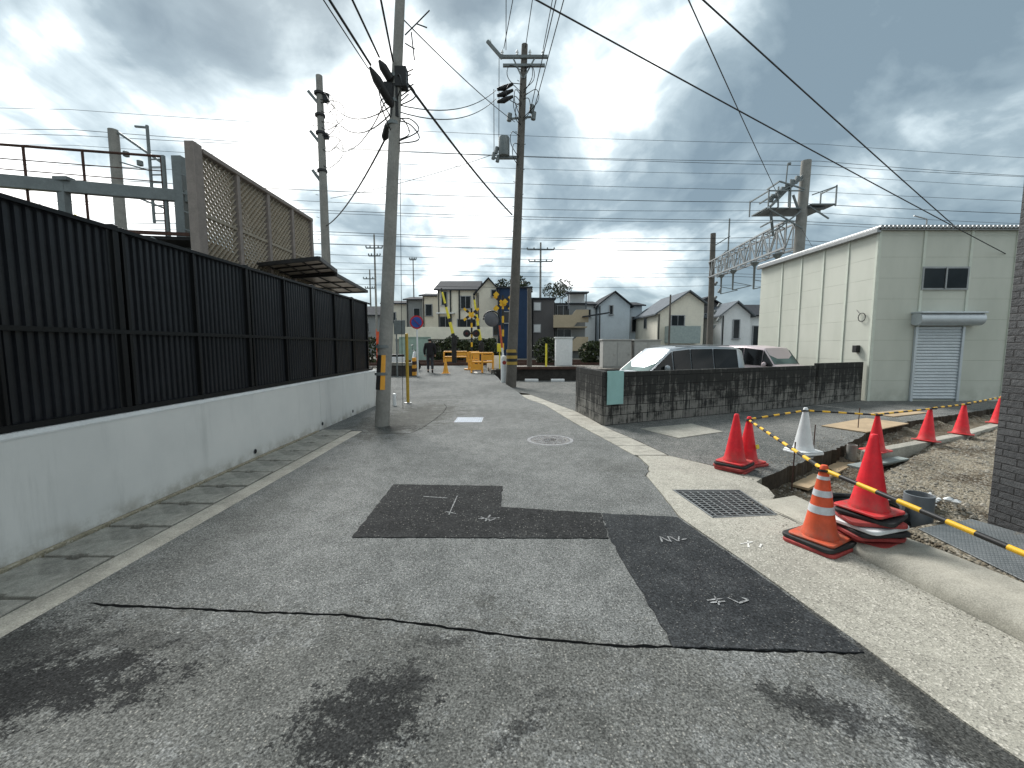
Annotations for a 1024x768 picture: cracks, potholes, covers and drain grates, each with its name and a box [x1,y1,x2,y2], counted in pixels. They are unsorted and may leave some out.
drain grate [673,490,777,518]
manhole cover [527,435,574,445]
crack [92,603,859,655]
